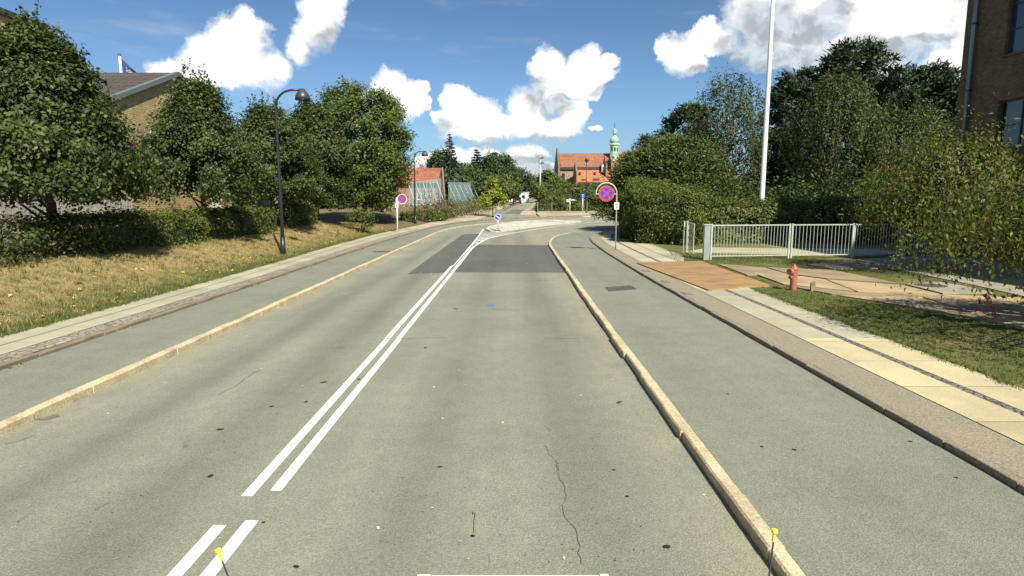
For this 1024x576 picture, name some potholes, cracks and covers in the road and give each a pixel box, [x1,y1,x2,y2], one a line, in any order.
crack [547,449,582,564]
